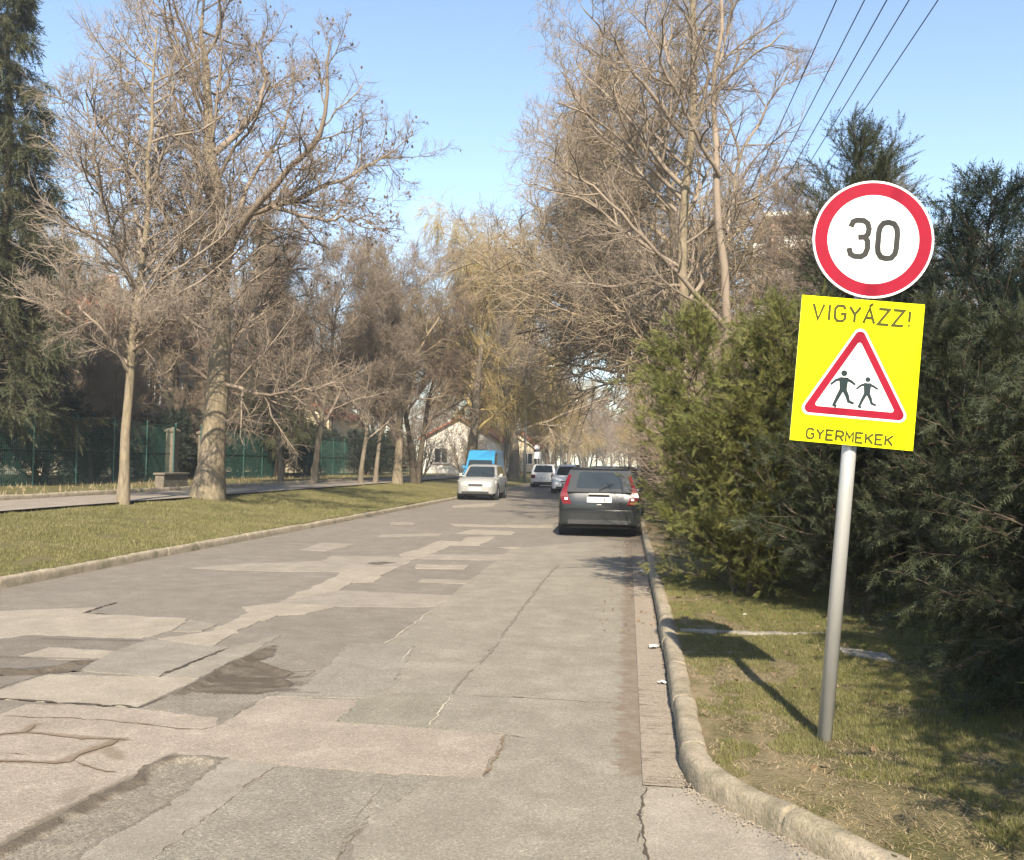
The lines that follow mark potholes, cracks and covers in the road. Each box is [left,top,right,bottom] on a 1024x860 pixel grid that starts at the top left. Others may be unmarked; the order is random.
crack [158,649,224,677]
crack [385,612,429,663]
crack [428,564,624,726]
crack [637,788,650,860]
crack [483,734,529,776]
crack [0,698,217,772]
pothole [173,646,297,696]
